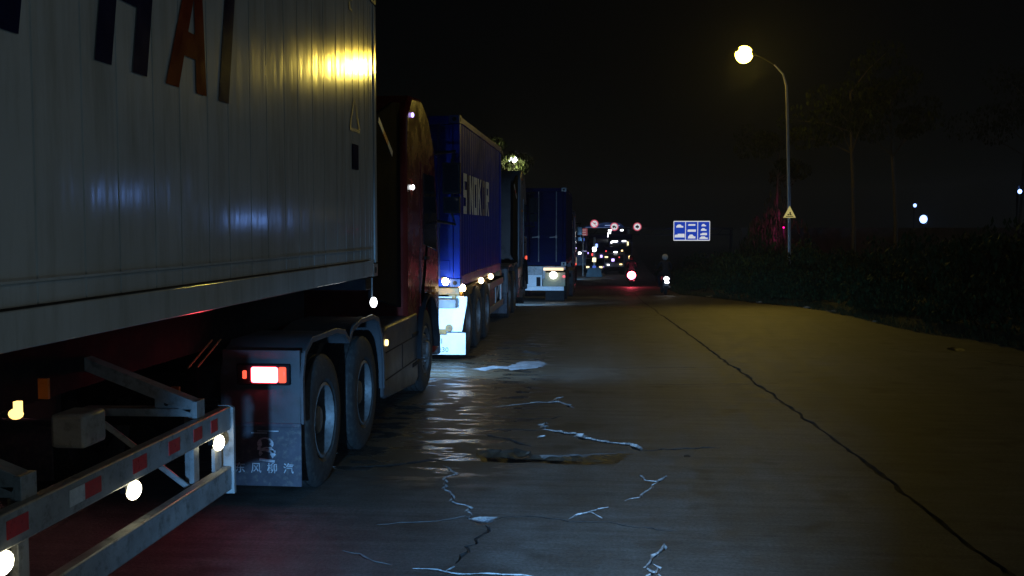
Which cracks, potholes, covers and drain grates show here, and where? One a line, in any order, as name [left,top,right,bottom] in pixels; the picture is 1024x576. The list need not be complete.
crack [351,294,1023,576]
pothole [476,448,635,465]
crack [342,550,392,565]
